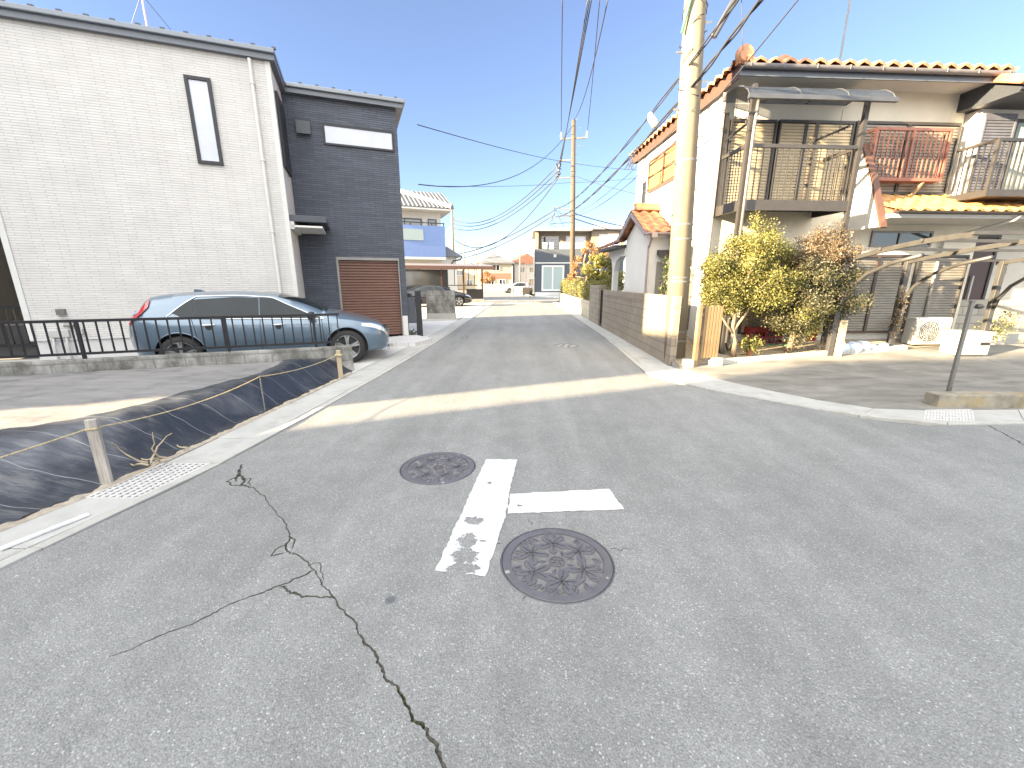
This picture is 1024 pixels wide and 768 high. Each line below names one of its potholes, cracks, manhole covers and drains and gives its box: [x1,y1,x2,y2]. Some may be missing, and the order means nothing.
drain grate [924,409,975,424]
drain grate [85,463,210,498]
crack [109,464,447,768]
manhole cover [500,528,615,605]
manhole cover [399,452,476,485]
